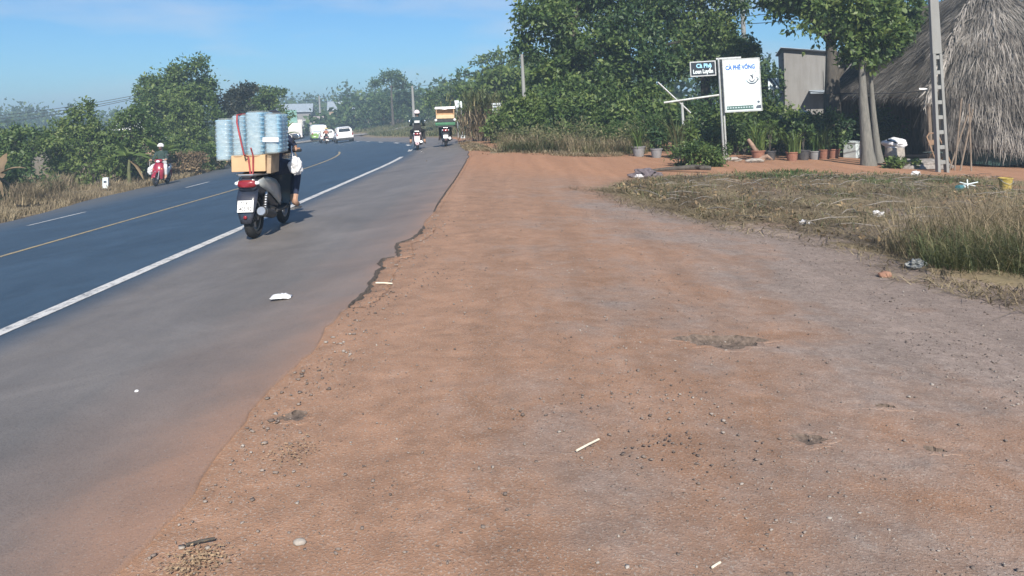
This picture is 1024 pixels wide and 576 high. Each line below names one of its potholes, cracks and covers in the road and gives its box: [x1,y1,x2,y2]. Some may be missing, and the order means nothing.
pothole [657,333,783,352]
pothole [778,430,842,451]
pothole [266,407,316,426]
